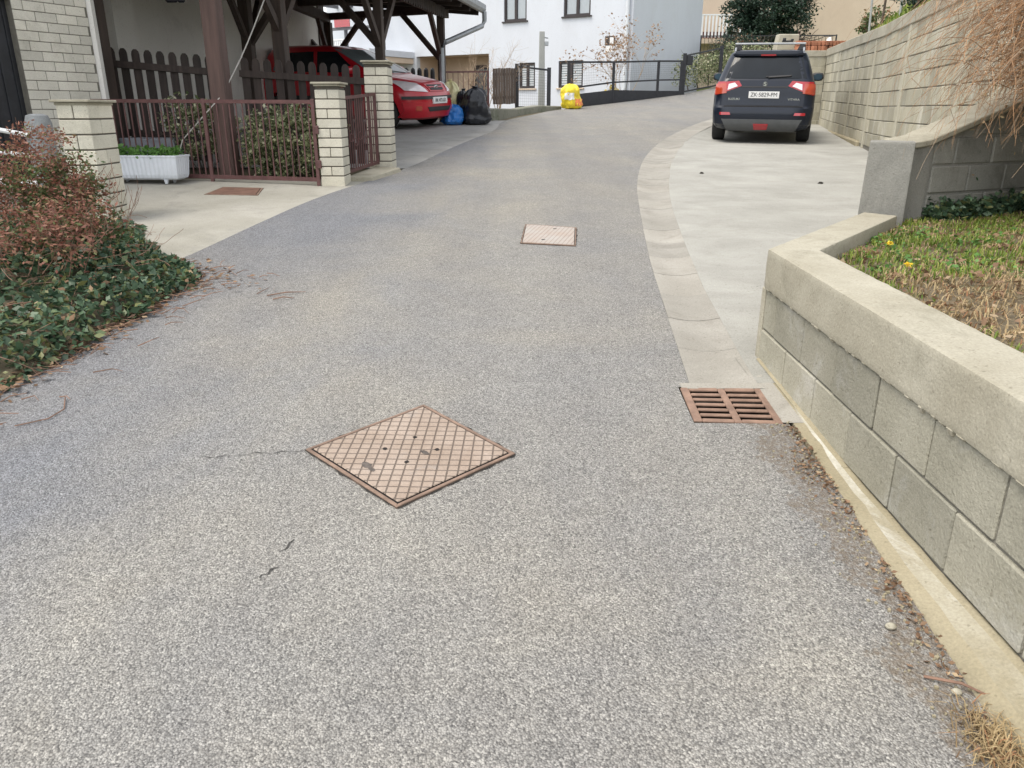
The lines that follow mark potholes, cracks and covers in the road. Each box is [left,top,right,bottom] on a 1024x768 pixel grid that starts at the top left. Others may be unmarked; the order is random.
crack [259,539,295,578]
manhole cover [305,404,515,509]
drain grate [679,357,804,424]
manhole cover [204,187,264,196]
manhole cover [520,224,578,247]
